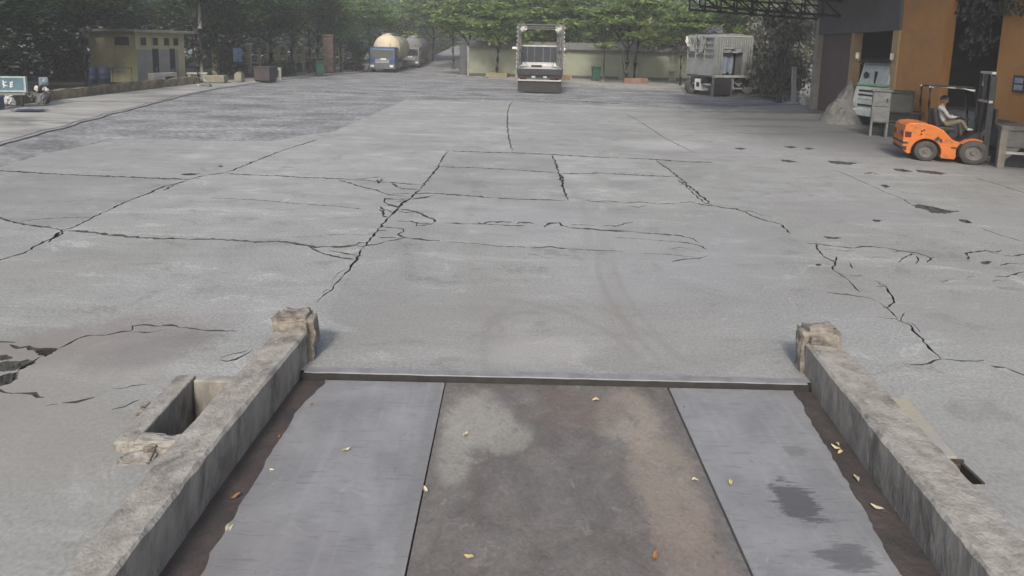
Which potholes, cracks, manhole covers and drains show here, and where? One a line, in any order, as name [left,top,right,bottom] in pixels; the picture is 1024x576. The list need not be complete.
pothole [0,359,36,372]
crack [0,324,233,371]
crack [807,170,1024,375]
pothole [912,204,959,214]
crack [0,140,706,302]
pothole [0,372,19,386]
crack [428,89,791,234]
crack [0,389,94,406]
